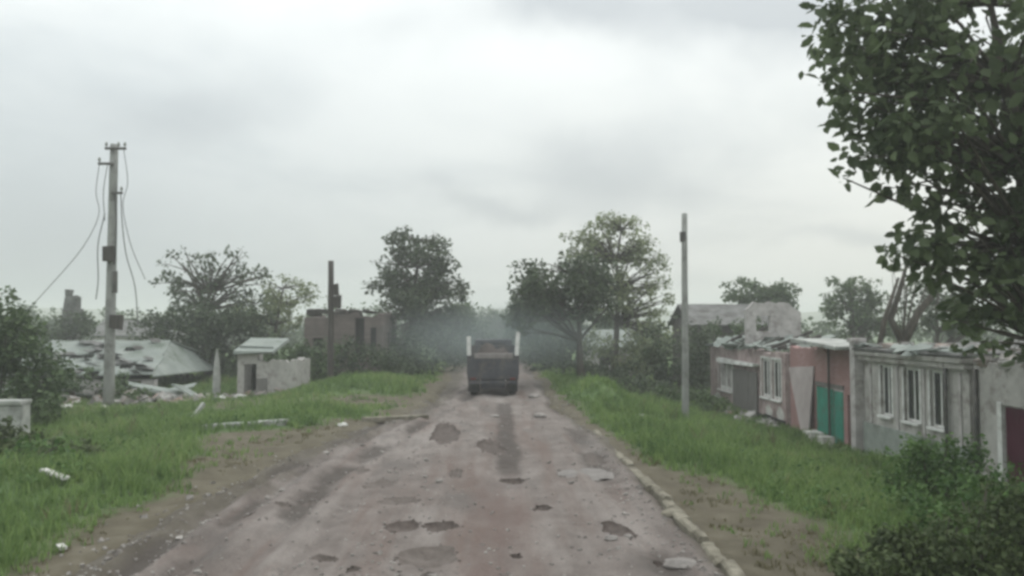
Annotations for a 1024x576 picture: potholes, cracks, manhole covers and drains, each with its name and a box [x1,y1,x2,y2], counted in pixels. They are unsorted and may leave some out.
pothole [383,519,422,533]
pothole [498,477,527,485]
pothole [429,421,461,444]
pothole [393,544,461,570]
pothole [449,468,464,478]
pothole [585,454,606,466]
pothole [311,554,340,562]
pothole [598,520,638,538]
pothole [421,519,464,532]
